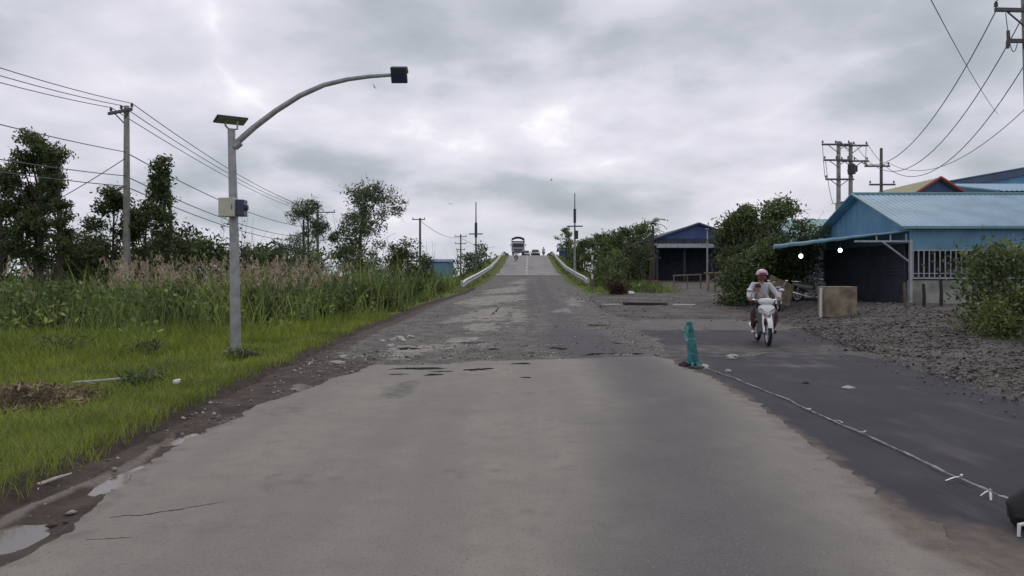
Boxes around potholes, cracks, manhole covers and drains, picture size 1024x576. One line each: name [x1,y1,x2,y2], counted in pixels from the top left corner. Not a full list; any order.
crack [109,502,220,518]
